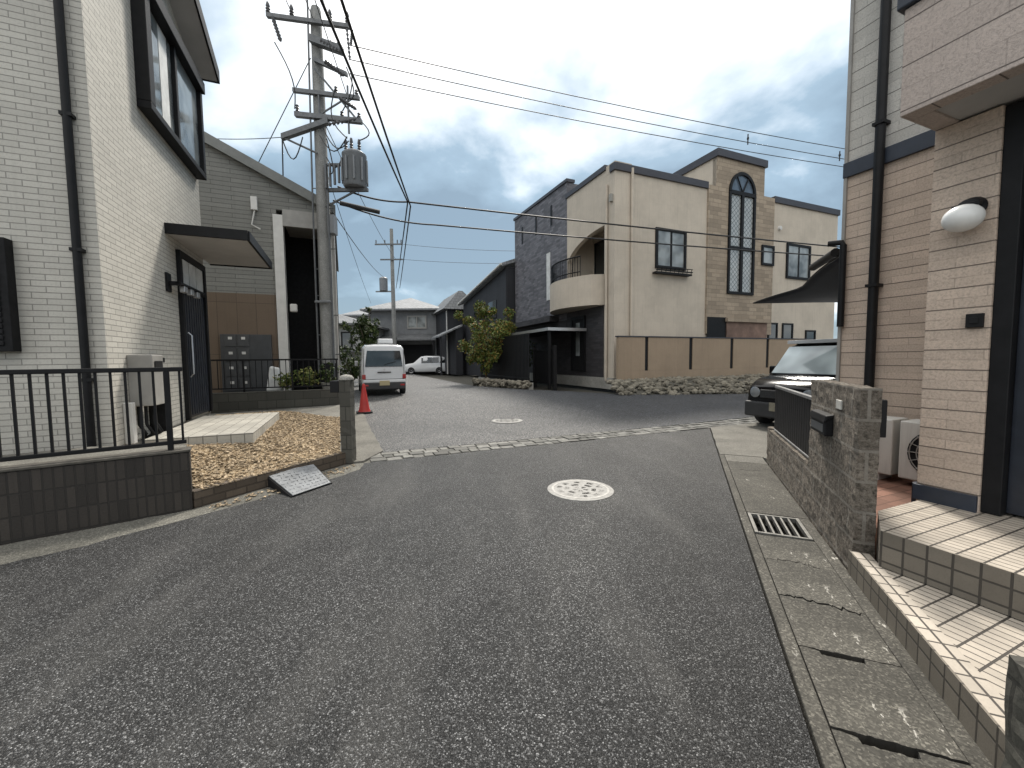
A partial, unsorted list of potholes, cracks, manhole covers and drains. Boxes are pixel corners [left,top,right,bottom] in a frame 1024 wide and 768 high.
drain grate [747,512,813,541]
manhole cover [547,479,614,501]
